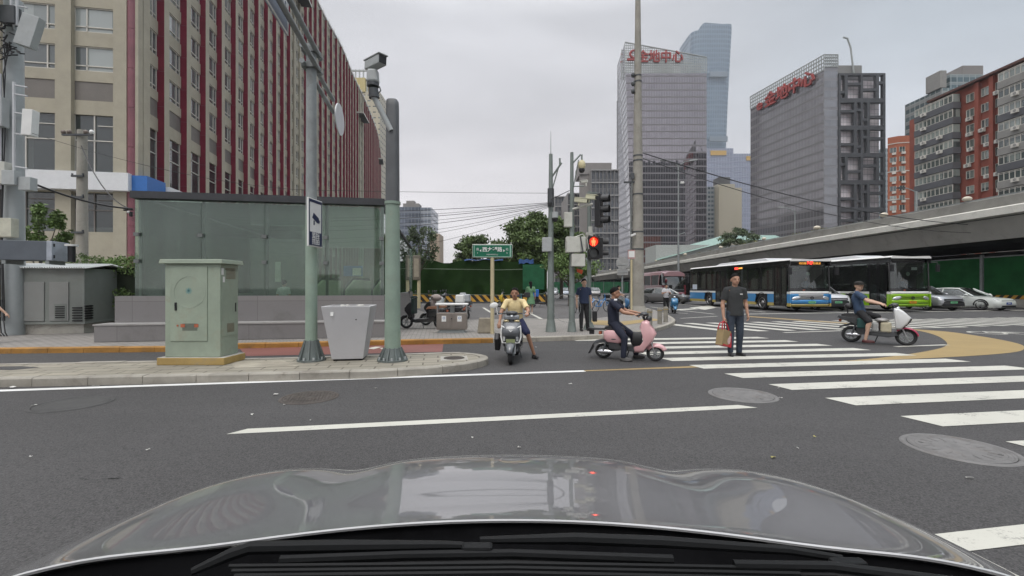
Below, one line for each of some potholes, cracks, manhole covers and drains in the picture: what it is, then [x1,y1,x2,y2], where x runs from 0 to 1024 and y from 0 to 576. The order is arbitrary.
manhole cover [24,396,116,413]
manhole cover [899,433,1024,467]
manhole cover [708,387,780,403]
manhole cover [278,390,339,405]
